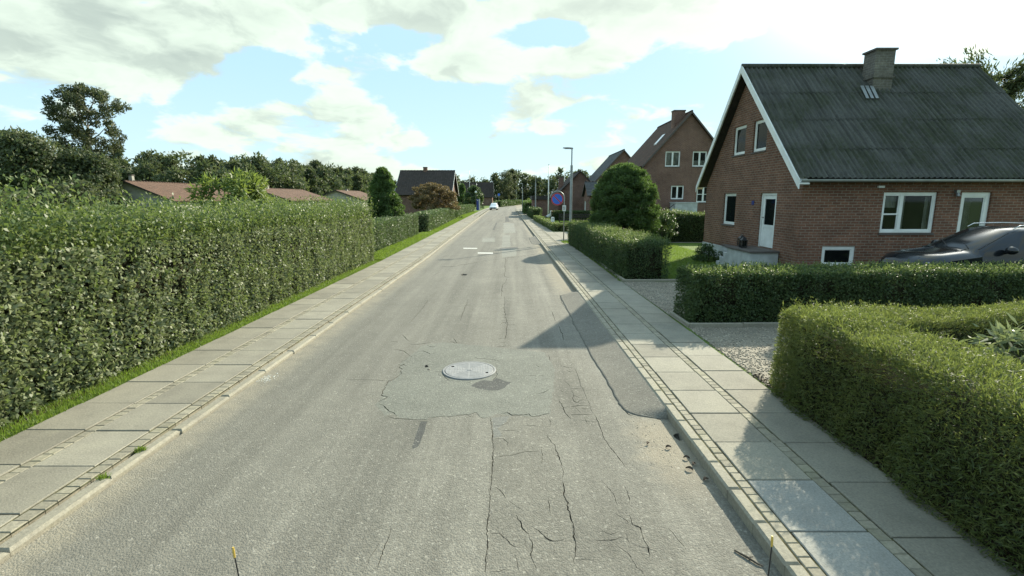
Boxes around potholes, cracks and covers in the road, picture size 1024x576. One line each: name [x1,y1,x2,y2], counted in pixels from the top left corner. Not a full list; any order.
crack [598,483,654,570]
crack [378,341,625,572]
manhole cover [442,361,496,380]
